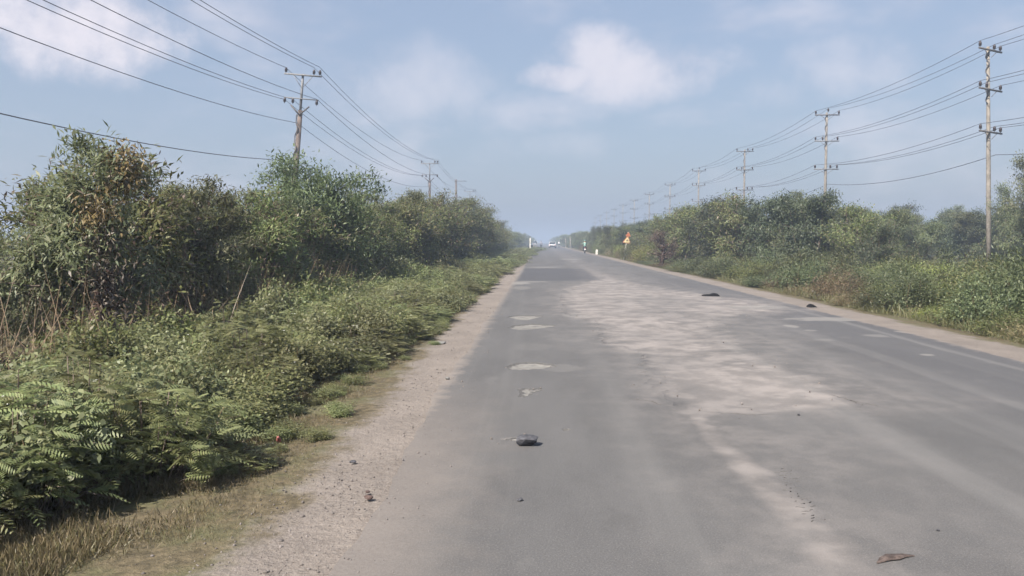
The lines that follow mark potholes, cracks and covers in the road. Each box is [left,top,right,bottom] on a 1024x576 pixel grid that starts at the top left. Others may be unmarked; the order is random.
pothole [517,387,543,398]
